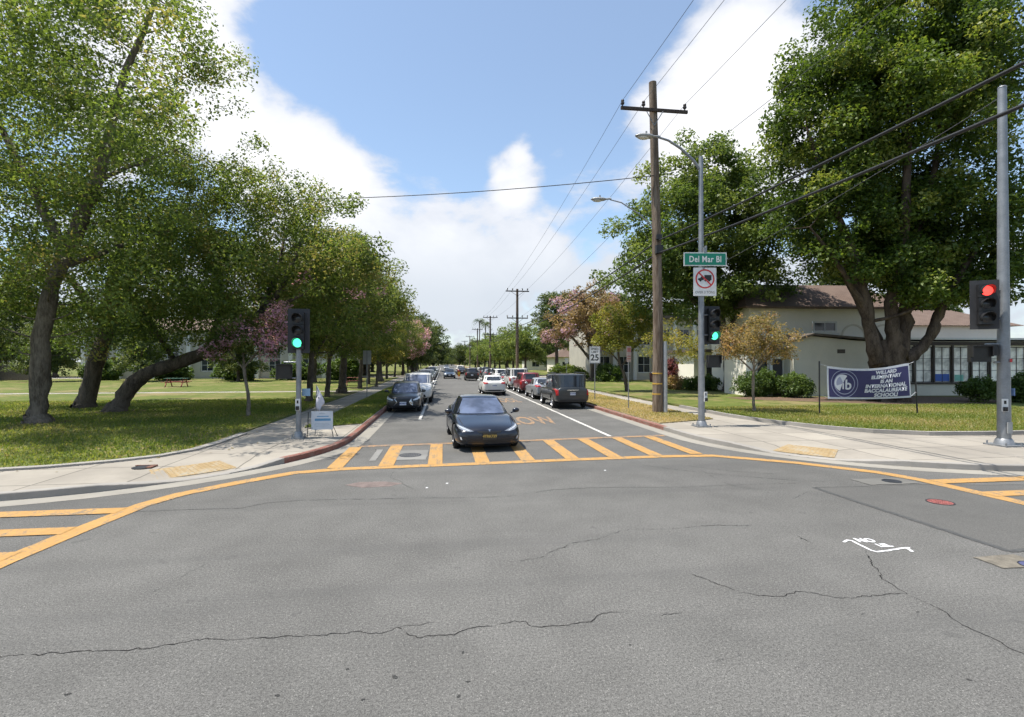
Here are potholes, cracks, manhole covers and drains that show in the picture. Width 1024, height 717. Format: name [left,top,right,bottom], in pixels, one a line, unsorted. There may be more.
manhole cover [396,450,429,460]
crack [510,465,807,562]
crack [693,555,1024,654]
crack [0,612,609,657]
utility cover [974,554,1024,568]
